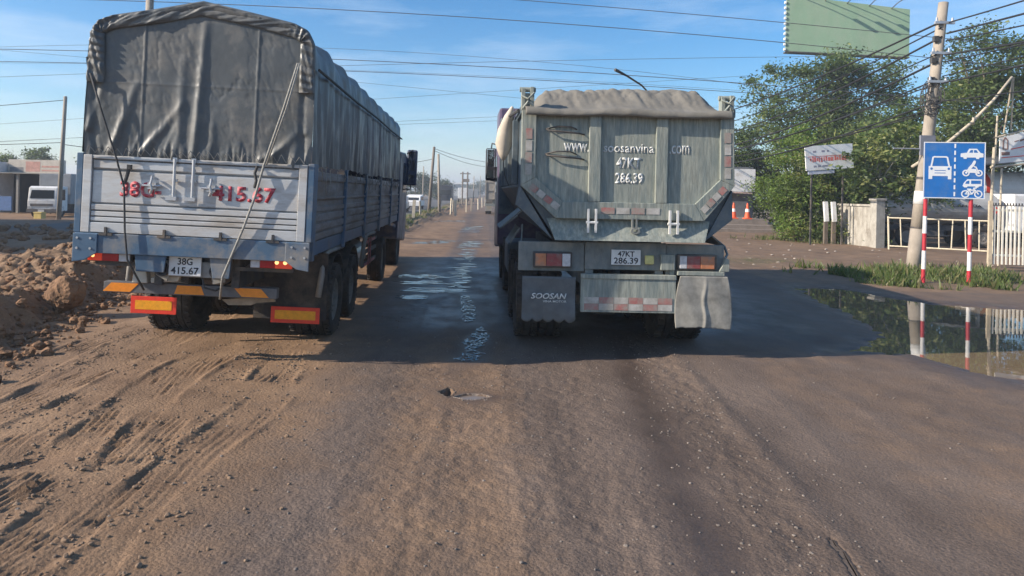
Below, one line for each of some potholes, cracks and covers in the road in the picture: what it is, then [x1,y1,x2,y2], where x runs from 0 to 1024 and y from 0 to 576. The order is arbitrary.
crack [829,540,861,576]
